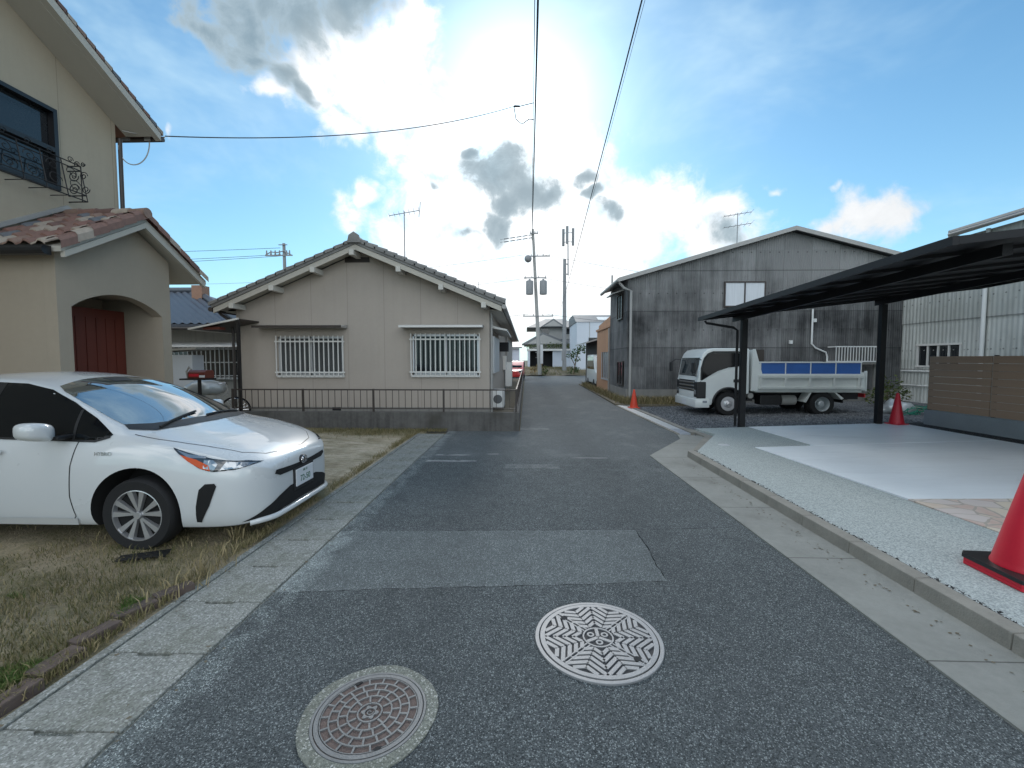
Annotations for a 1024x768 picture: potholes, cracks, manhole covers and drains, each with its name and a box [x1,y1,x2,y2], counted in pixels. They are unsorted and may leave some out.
manhole cover [296,665,438,768]
manhole cover [535,602,665,686]
